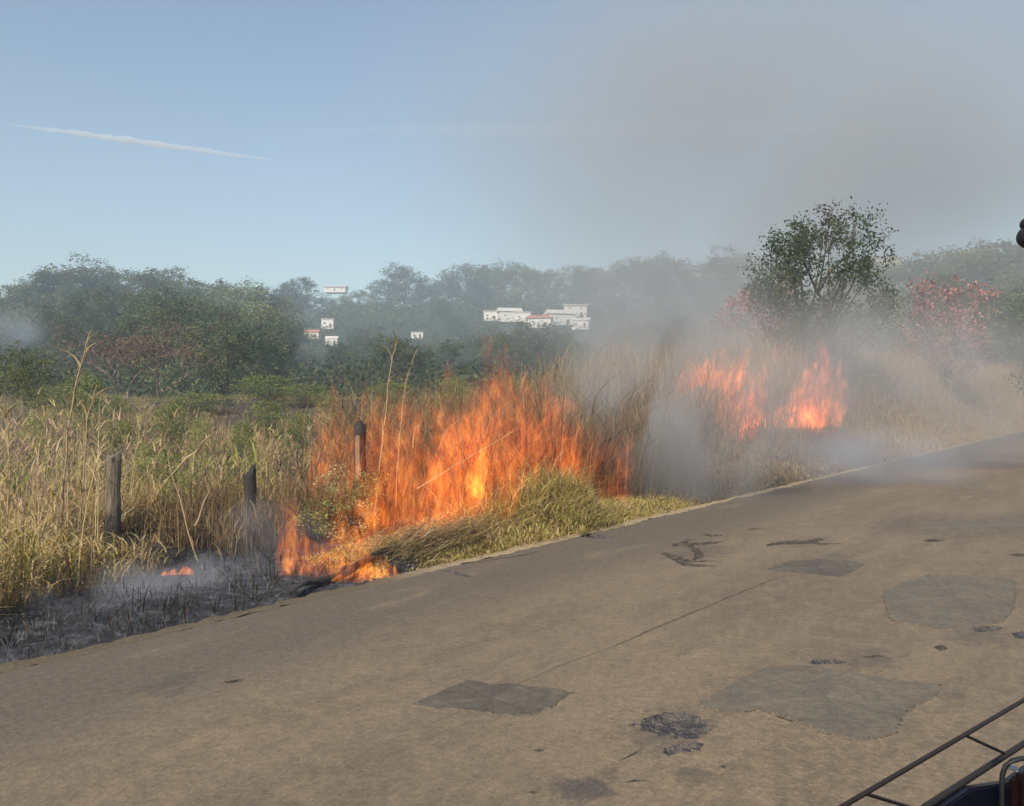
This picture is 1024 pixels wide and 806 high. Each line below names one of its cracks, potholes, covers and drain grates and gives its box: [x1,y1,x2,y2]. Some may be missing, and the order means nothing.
crack [747,528,841,547]
crack [399,534,779,737]
pothole [629,710,712,756]
pothole [970,626,1024,639]
